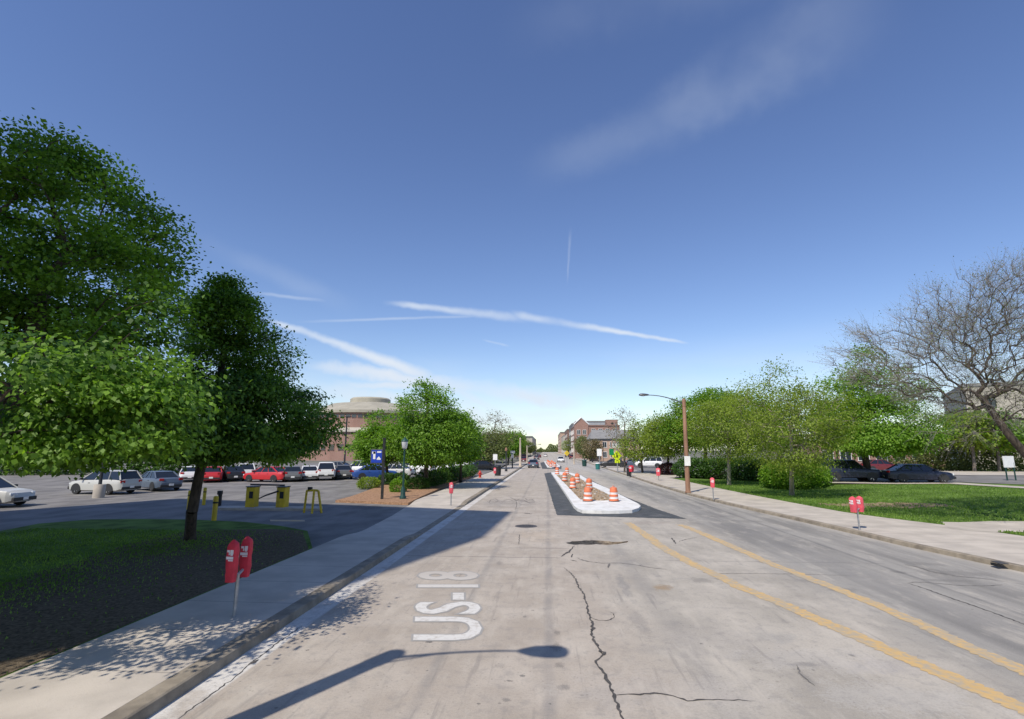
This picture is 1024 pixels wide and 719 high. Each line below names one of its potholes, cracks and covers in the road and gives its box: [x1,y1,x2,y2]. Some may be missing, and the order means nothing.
crack [905,564,1023,624]
crack [561,546,748,719]
